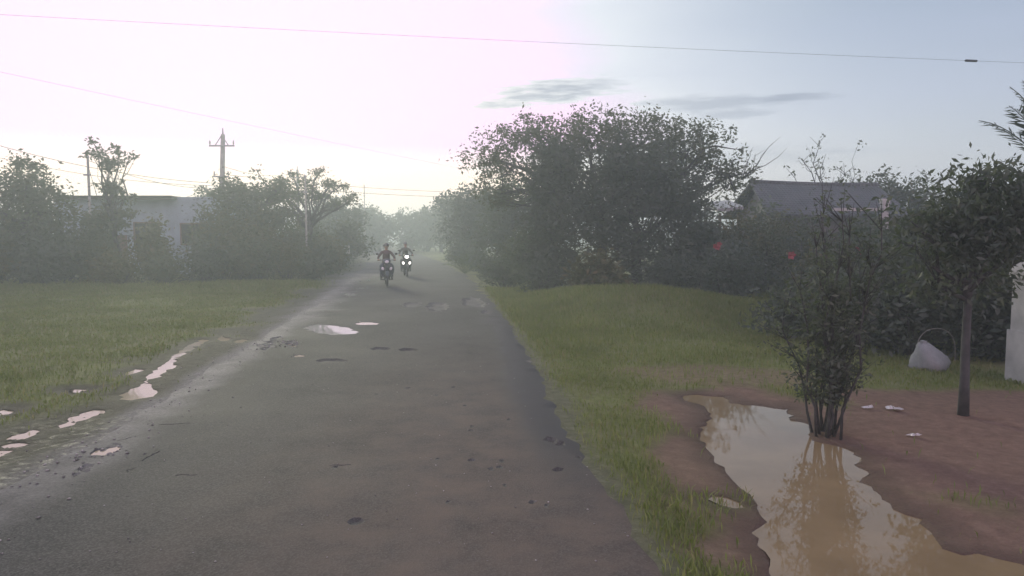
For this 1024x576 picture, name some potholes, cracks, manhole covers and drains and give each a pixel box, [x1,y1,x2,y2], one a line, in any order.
pothole [259,336,281,351]
pothole [543,436,565,446]
pothole [303,324,358,335]
pothole [425,302,450,312]
pothole [86,443,123,459]
pothole [347,517,365,525]
pothole [462,297,487,307]
